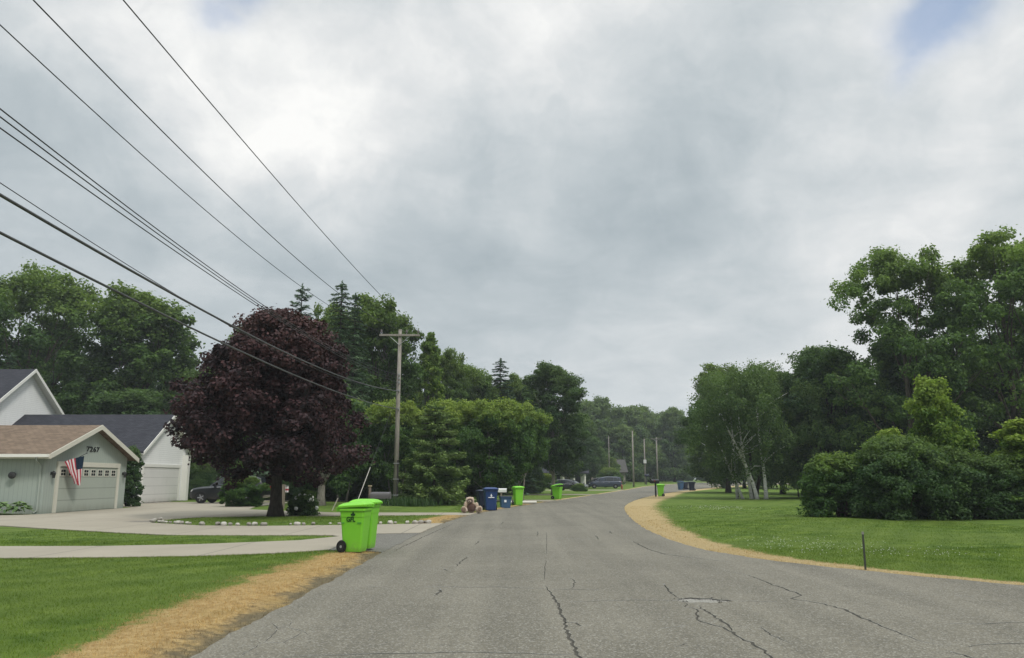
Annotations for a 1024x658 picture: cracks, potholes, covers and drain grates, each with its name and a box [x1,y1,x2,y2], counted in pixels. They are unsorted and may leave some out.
crack [242,522,935,658]
